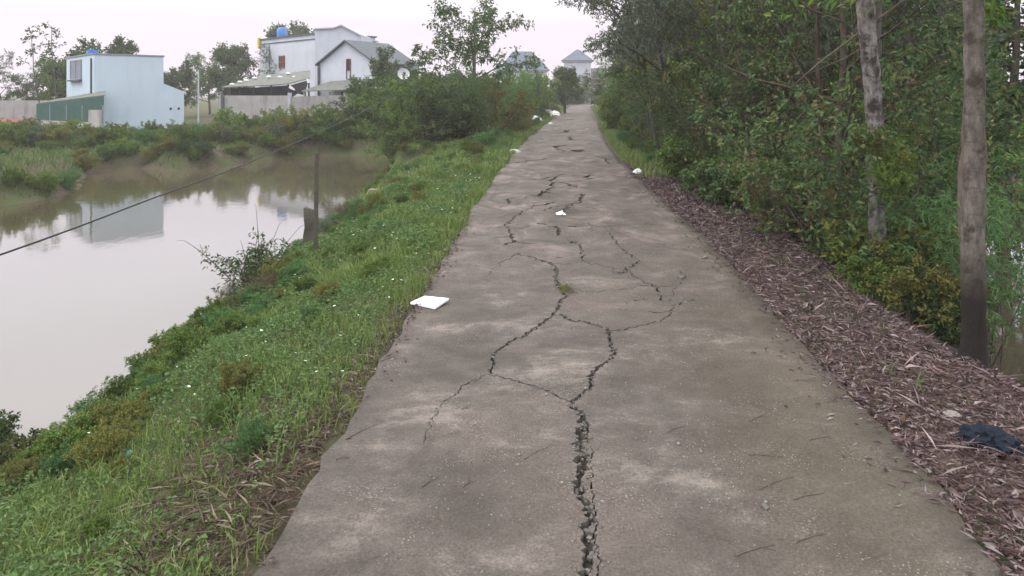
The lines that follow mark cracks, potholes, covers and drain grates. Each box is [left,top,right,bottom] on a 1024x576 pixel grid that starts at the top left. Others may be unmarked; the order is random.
crack [414,119,695,576]
